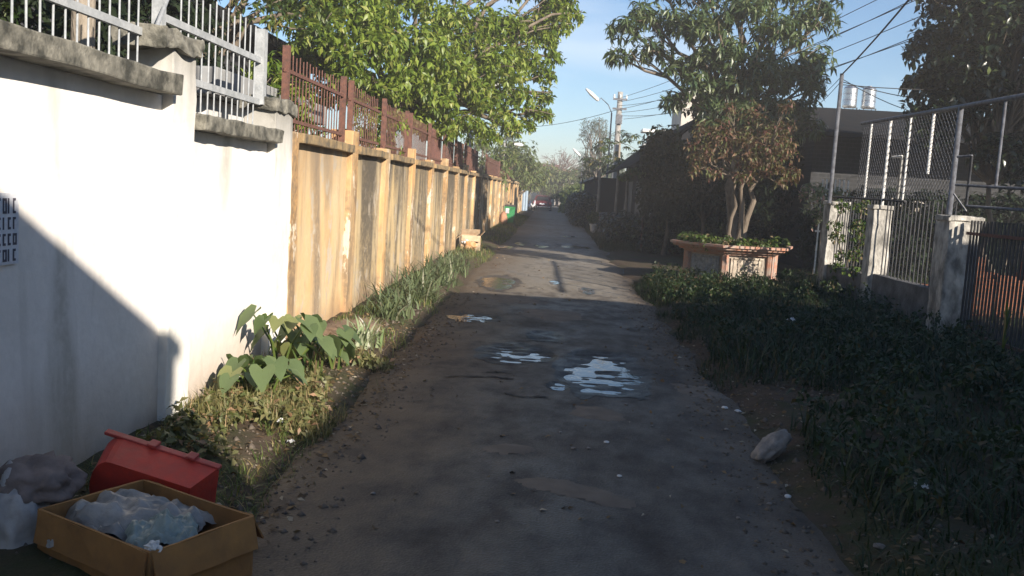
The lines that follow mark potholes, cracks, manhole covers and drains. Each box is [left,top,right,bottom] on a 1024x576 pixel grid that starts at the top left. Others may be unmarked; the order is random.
crack [413,371,546,402]
pothole [475,275,524,292]
